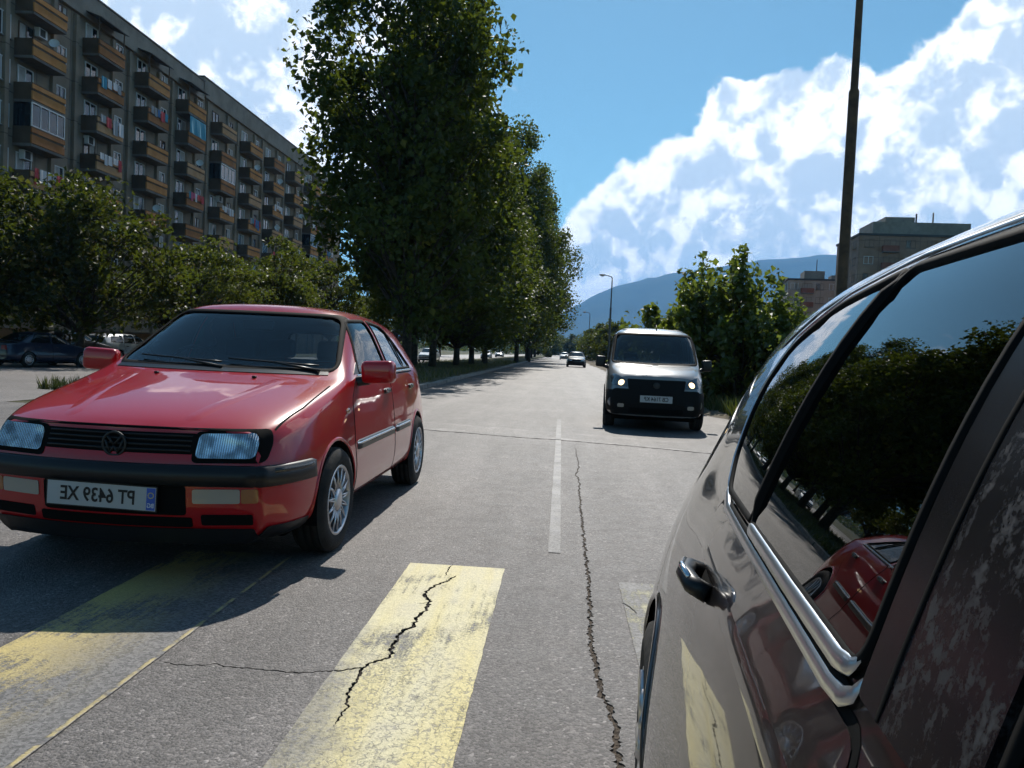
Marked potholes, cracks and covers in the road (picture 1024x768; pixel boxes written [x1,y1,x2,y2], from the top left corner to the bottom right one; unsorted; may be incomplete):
crack [432,430,711,768]
crack [159,566,452,724]
